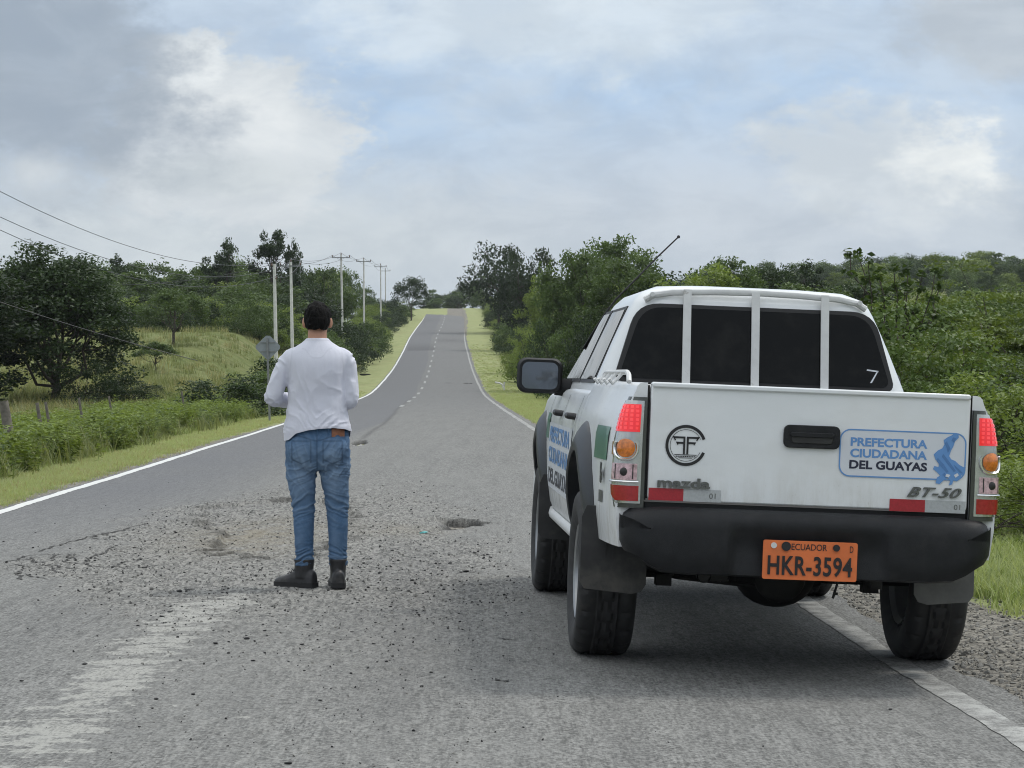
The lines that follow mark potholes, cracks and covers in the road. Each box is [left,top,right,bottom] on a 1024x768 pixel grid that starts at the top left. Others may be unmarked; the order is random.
pothole [189,497,369,561]
crack [9,523,155,580]
